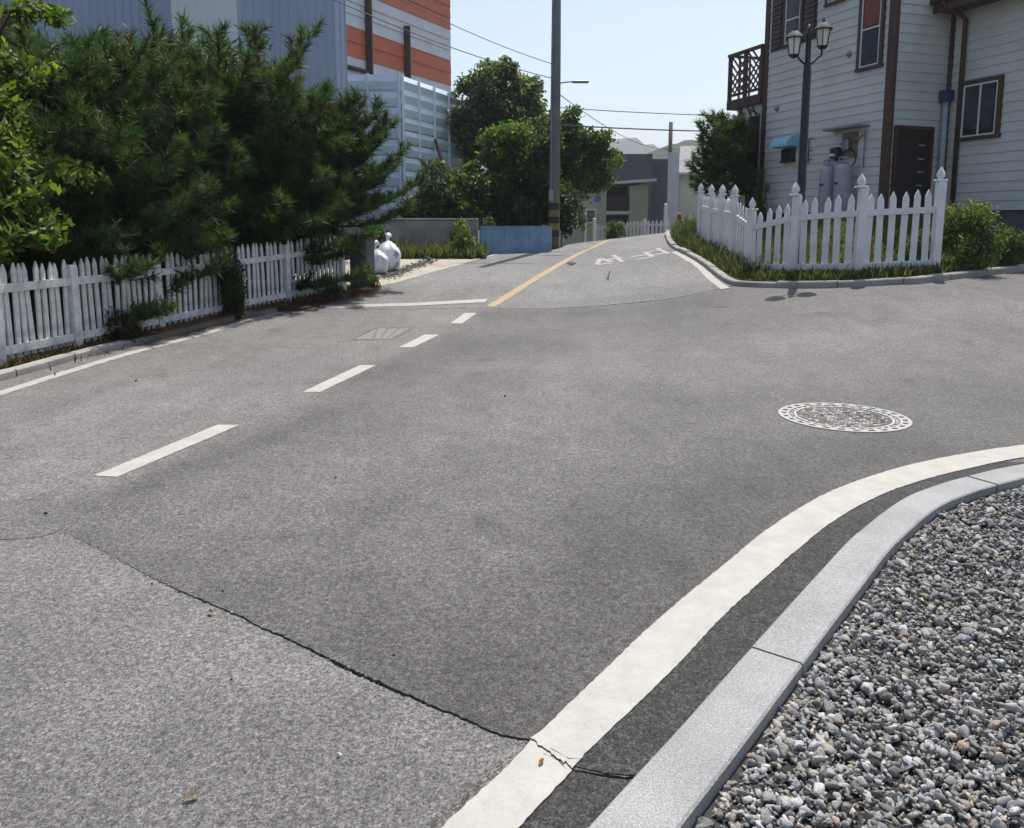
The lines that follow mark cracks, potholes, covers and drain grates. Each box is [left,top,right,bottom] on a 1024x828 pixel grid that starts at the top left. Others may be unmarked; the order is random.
manhole cover [778,403,912,433]
